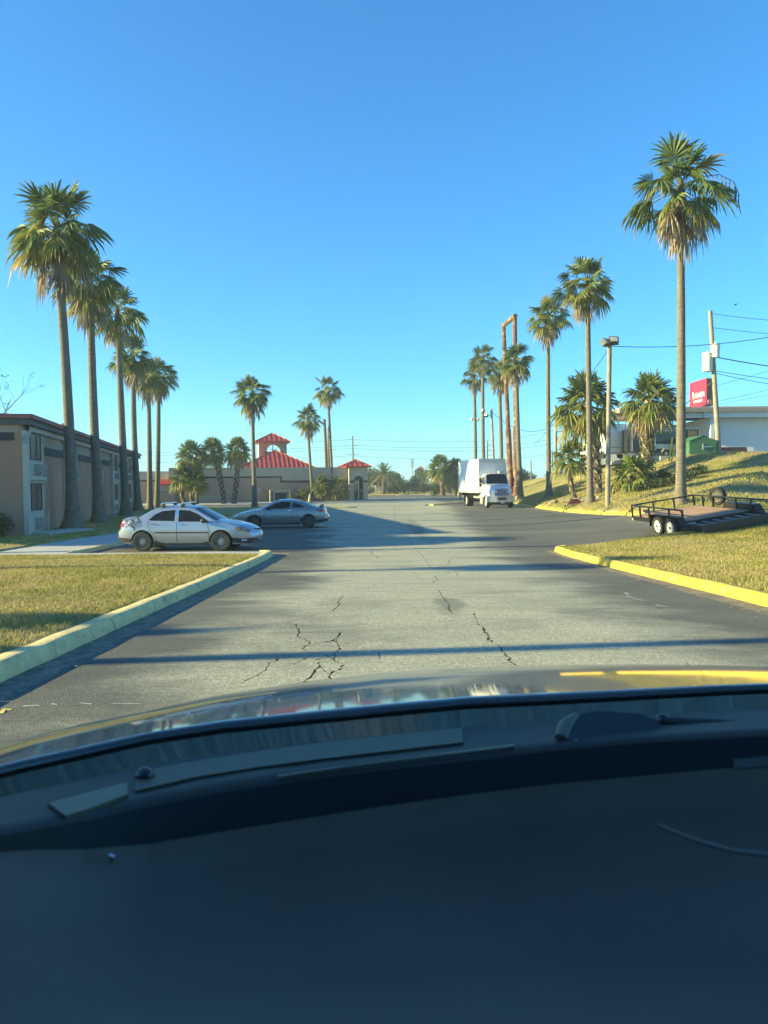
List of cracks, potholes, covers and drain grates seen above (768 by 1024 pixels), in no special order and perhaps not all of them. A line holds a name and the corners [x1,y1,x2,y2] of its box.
crack [286,596,349,682]
crack [473,613,520,666]
